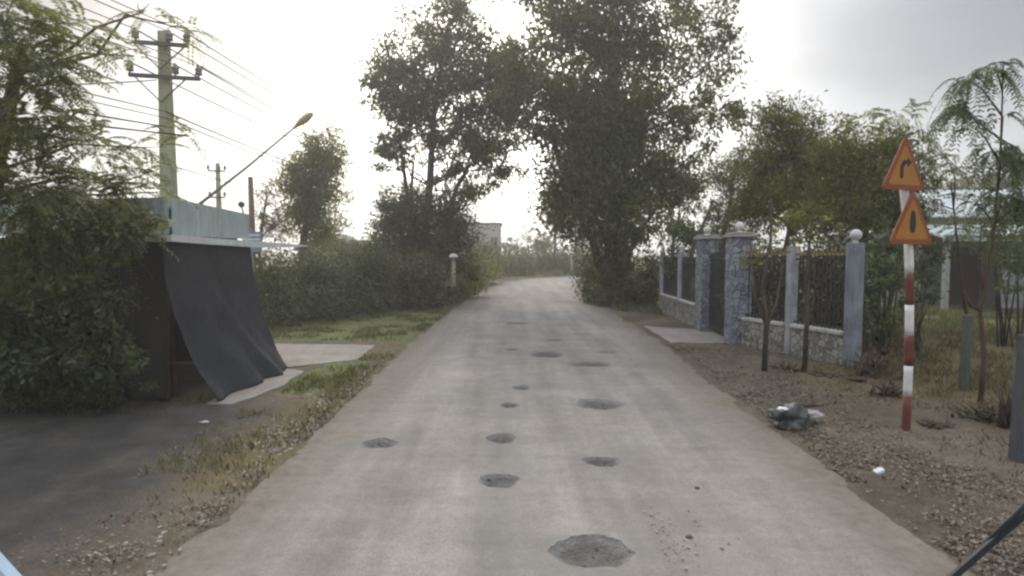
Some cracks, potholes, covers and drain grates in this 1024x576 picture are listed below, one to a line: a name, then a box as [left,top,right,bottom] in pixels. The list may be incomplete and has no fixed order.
pothole [547,534,636,568]
pothole [485,433,517,444]
pothole [479,473,520,488]
pothole [577,399,626,410]
pothole [581,457,621,467]
pothole [529,350,565,358]
pothole [361,438,398,448]
